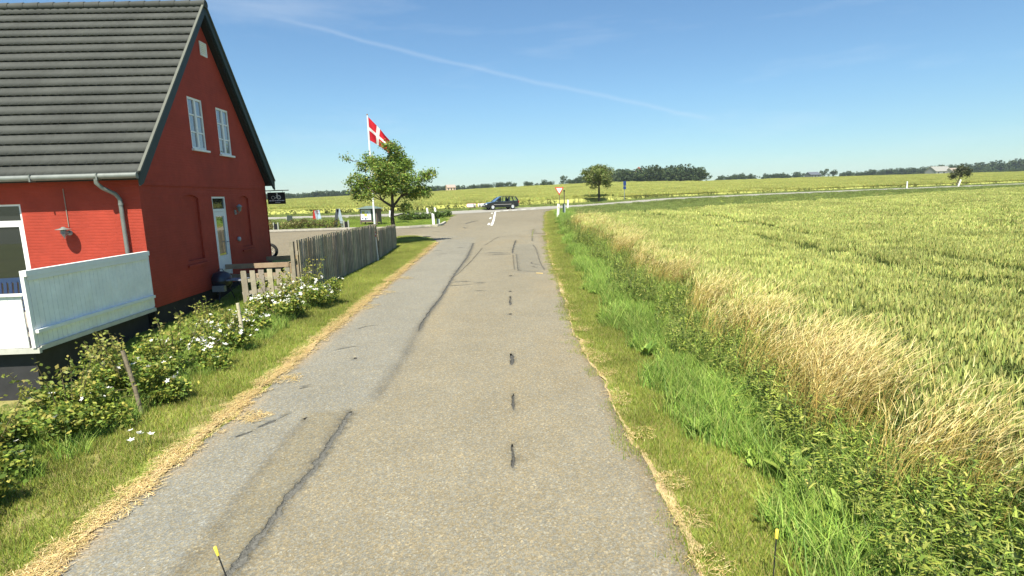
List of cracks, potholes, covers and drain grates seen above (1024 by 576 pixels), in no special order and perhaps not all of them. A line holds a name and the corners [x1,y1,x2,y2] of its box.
crack [223,411,352,576]
